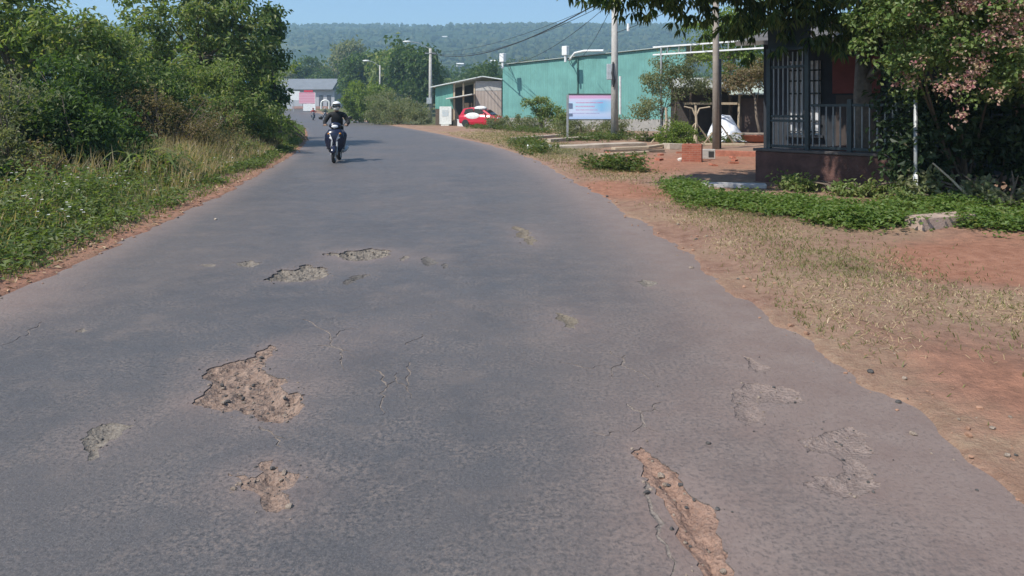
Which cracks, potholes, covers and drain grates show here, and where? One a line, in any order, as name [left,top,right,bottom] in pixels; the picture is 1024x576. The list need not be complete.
crack [643,481,676,576]
crack [376,362,411,415]
crack [561,351,670,436]
pothole [322,247,391,261]
pothole [80,420,135,461]
pothole [188,344,305,431]
pothole [219,460,308,520]
pothole [264,264,333,284]
